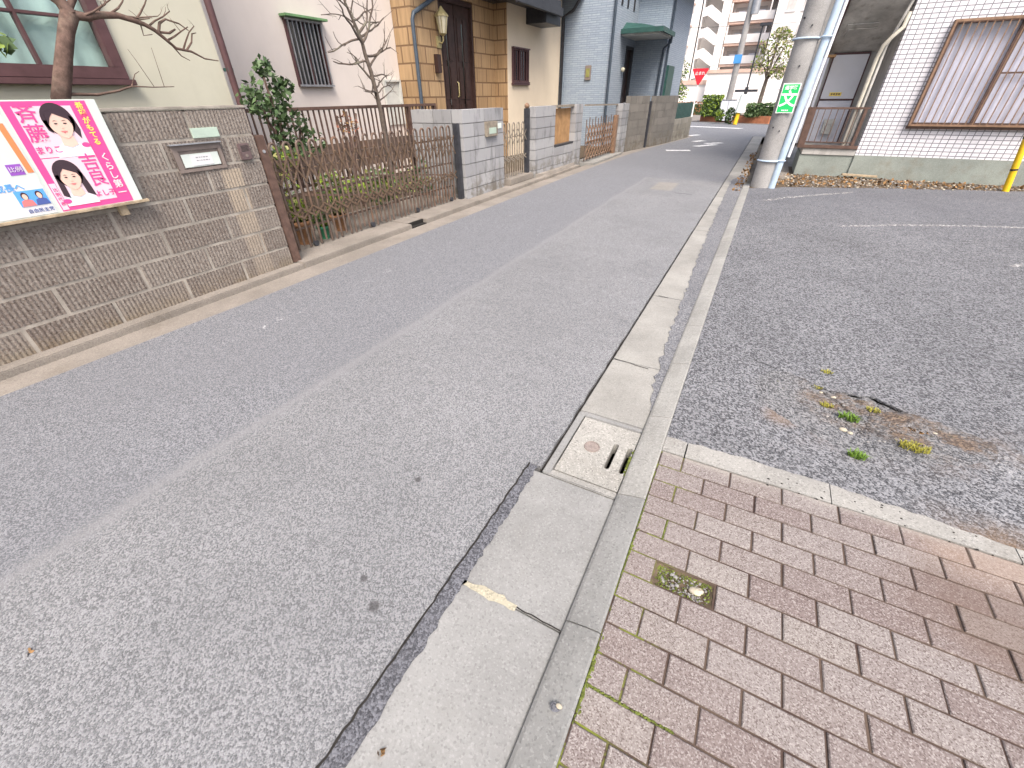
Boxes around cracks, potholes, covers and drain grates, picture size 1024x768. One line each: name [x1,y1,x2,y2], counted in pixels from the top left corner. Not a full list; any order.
crack [315,137,753,768]
pothole [756,370,999,466]
